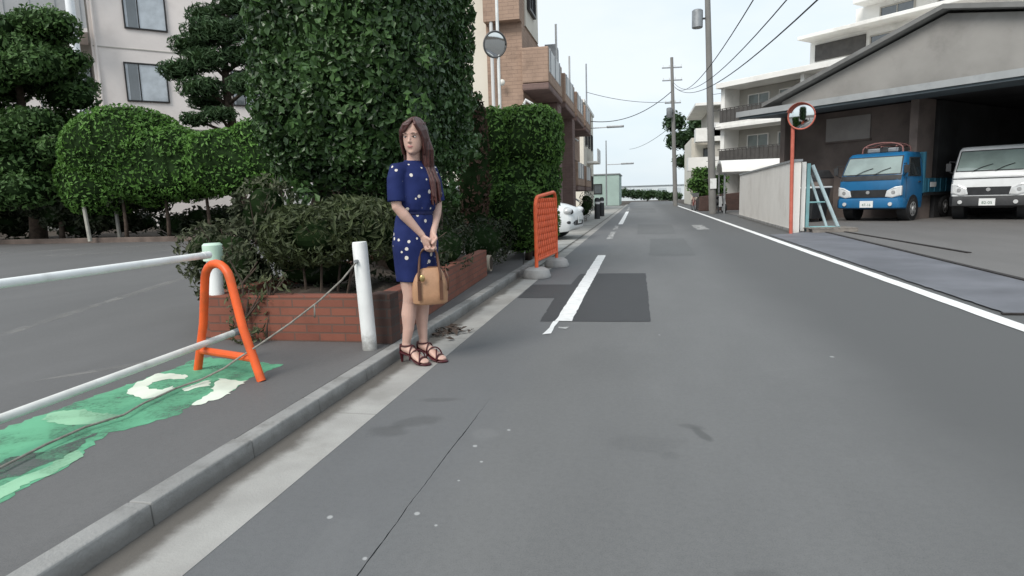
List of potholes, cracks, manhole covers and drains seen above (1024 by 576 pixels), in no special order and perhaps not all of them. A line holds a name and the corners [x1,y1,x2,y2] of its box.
crack [356,403,487,576]
